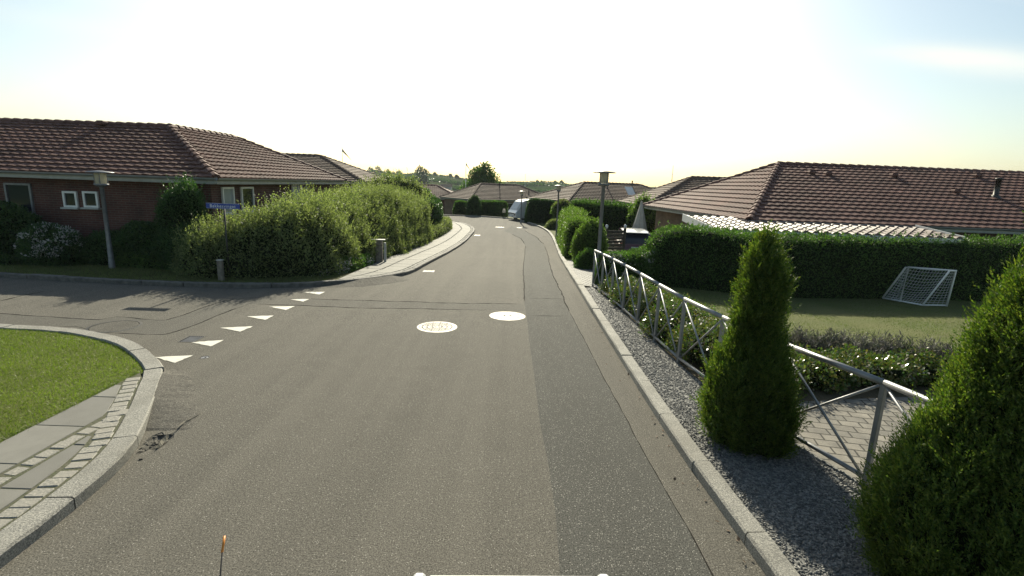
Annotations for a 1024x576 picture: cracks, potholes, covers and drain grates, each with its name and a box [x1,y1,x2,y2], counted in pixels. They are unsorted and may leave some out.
pothole [135,432,174,455]
crack [512,234,714,576]
manhole cover [85,320,143,333]
manhole cover [489,312,525,320]
manhole cover [417,321,457,333]
